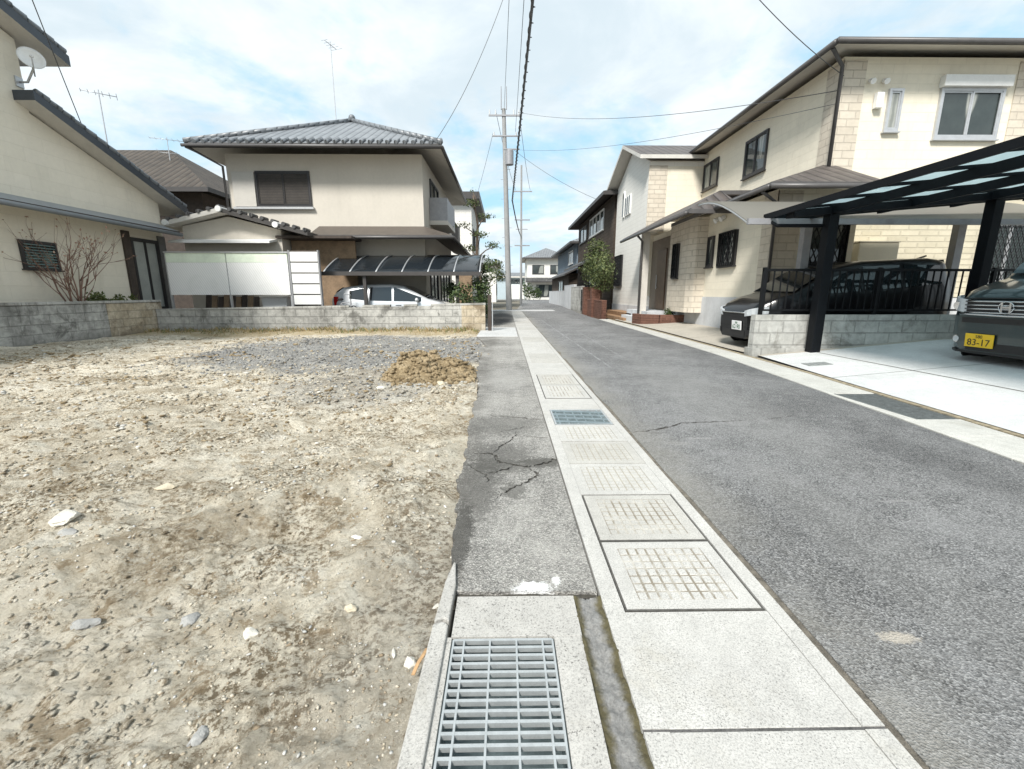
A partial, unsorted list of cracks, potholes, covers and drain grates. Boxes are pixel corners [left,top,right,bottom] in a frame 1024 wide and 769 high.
crack [471,416,557,496]
drain grate [550,409,613,425]
manhole cover [540,385,592,399]
drain grate [433,638,571,769]
manhole cover [599,541,765,612]
manhole cover [582,495,708,542]
drain grate [836,394,958,419]
manhole cover [536,375,580,385]
